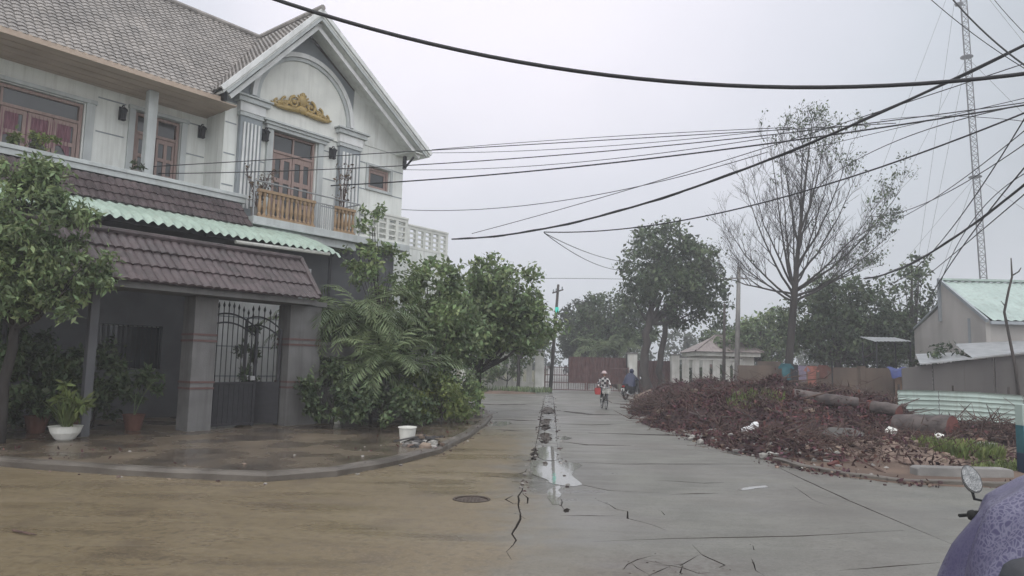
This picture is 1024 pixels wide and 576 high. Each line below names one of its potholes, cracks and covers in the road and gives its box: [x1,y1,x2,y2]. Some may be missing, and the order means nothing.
manhole cover [453,495,491,503]
crack [505,469,529,560]
crack [623,552,731,576]
